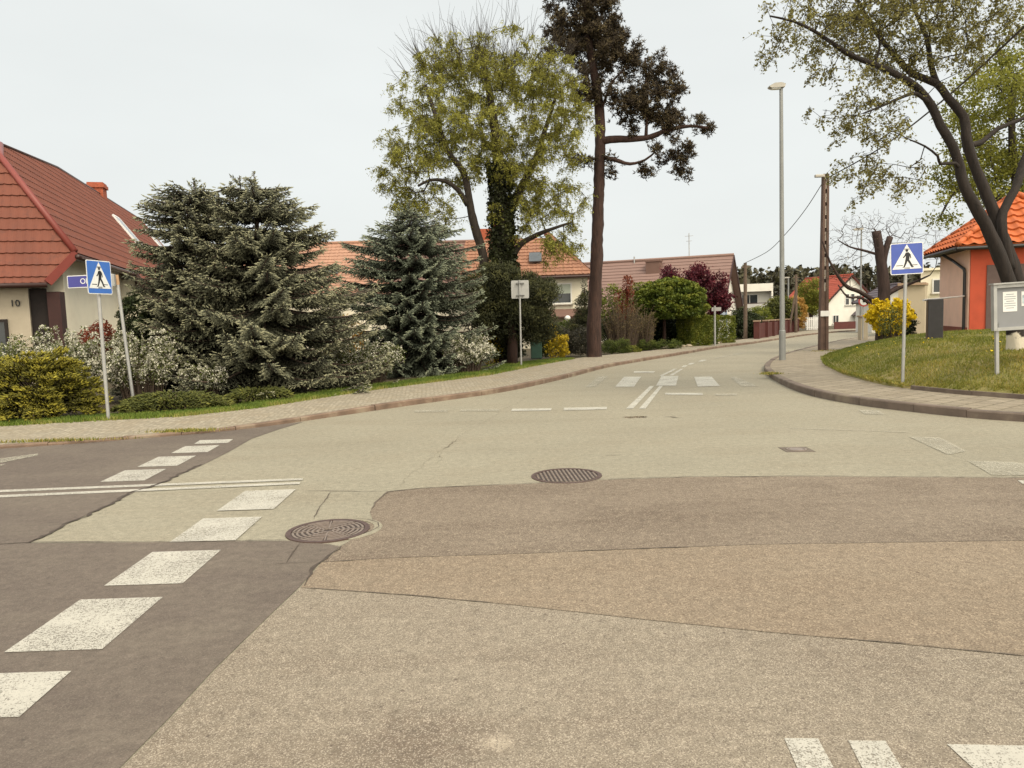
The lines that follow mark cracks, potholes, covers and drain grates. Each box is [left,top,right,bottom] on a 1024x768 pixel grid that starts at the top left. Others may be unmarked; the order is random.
manhole cover [531,468,602,483]
manhole cover [285,518,382,543]
